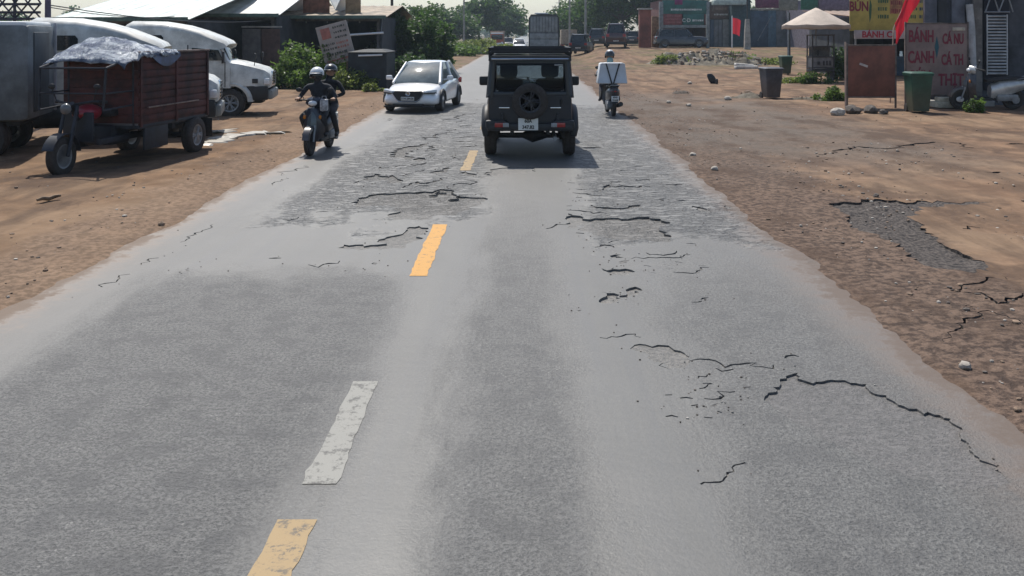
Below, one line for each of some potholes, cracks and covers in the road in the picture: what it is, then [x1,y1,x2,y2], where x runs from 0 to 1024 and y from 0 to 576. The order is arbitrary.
crack [546,166,709,274]
crack [700,462,746,485]
crack [818,142,974,155]
crack [379,113,490,201]
crack [942,277,1024,342]
crack [666,355,799,418]
